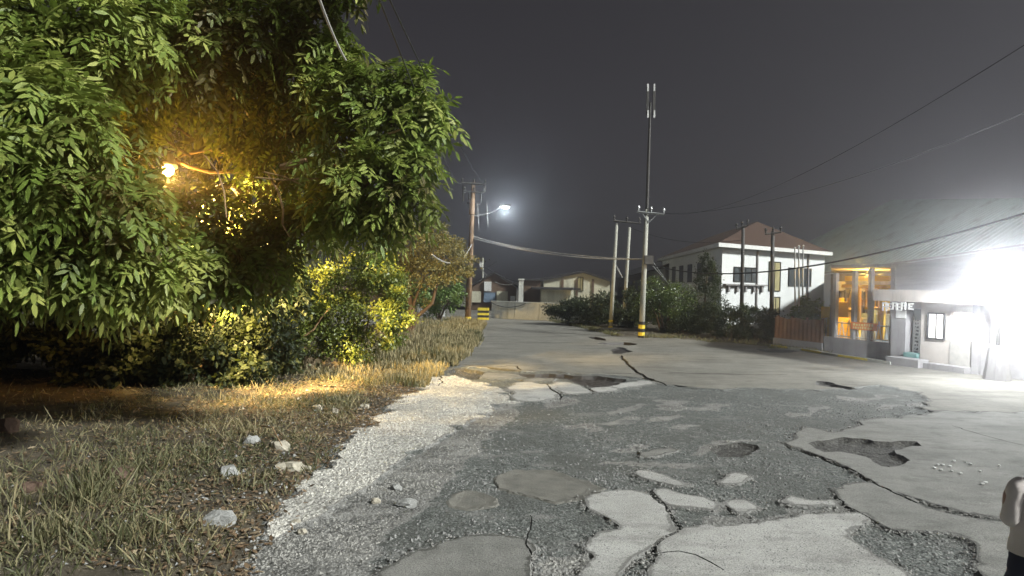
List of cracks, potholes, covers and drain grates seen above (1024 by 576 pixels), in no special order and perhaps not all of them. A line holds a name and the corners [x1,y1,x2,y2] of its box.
pothole [709,442,760,457]
pothole [808,437,921,467]
crack [624,494,724,572]
pothole [815,381,858,390]
crack [611,355,785,386]
crack [525,515,534,576]
pothole [519,374,626,388]
